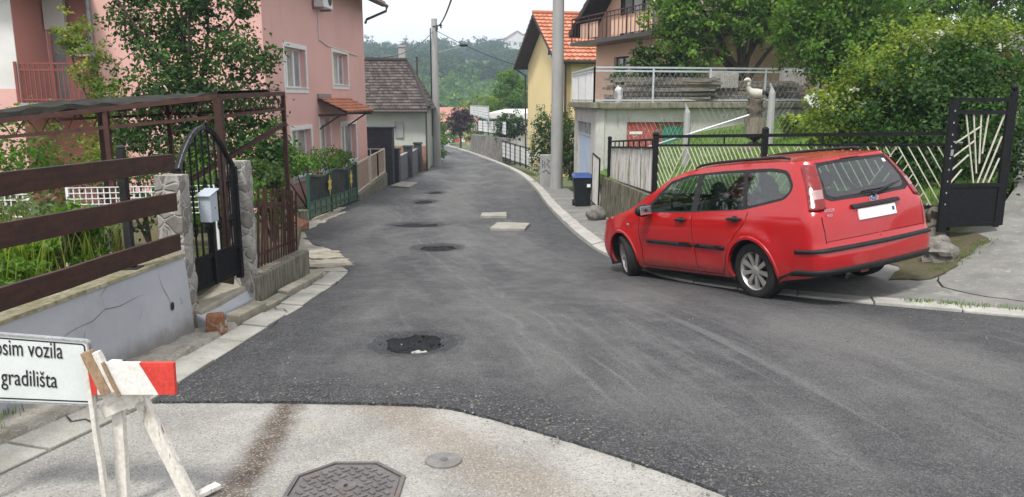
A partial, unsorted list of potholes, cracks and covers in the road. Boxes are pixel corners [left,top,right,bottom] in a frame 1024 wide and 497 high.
manhole cover [425,452,462,469]
pothole [379,335,444,354]
manhole cover [282,461,405,497]
crack [937,277,1024,302]
